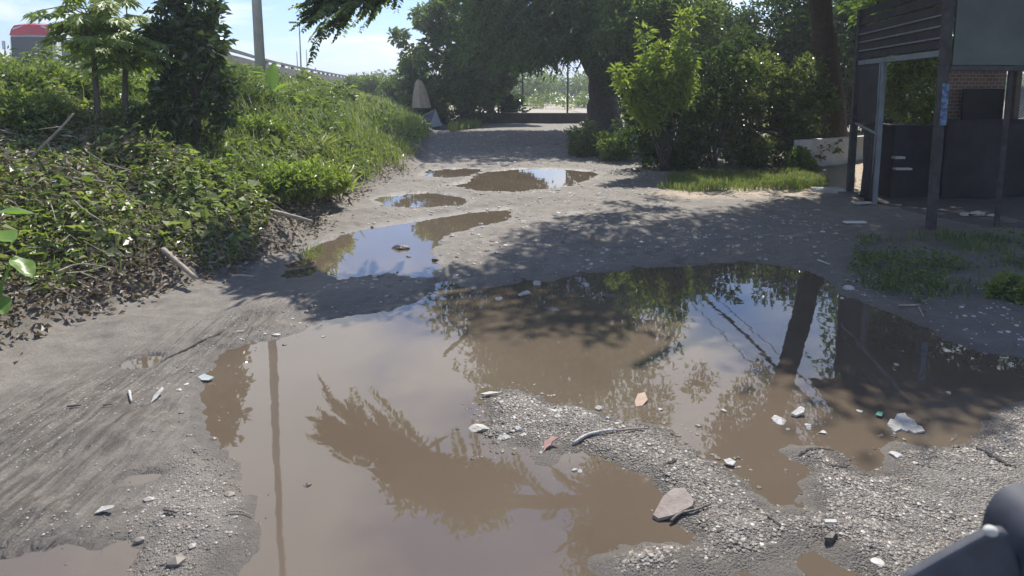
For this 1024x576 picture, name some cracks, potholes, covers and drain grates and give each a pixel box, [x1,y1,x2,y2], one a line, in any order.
pothole [277,207,515,280]
pothole [421,168,483,178]
crack [160,330,225,362]
pothole [109,351,170,371]
pothole [190,258,1024,576]
pothole [371,192,472,208]
pothole [443,168,603,192]
